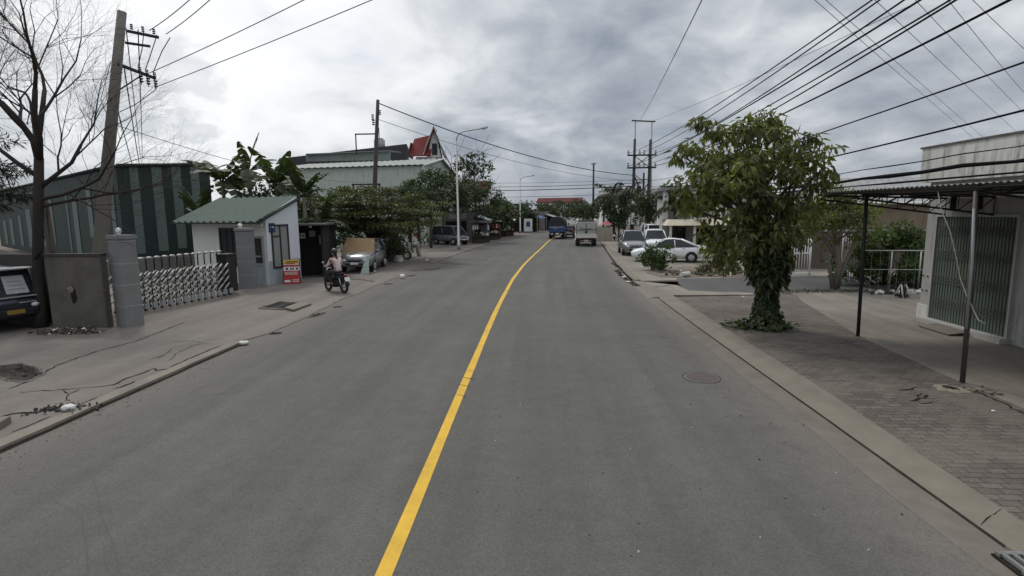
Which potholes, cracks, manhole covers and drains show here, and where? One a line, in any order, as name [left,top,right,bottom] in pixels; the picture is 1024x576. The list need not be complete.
drain grate [258,300,299,310]
pothole [0,363,46,382]
manhole cover [681,372,721,383]
drain grate [991,551,1024,576]
crack [977,392,1024,413]
crack [0,341,220,432]
